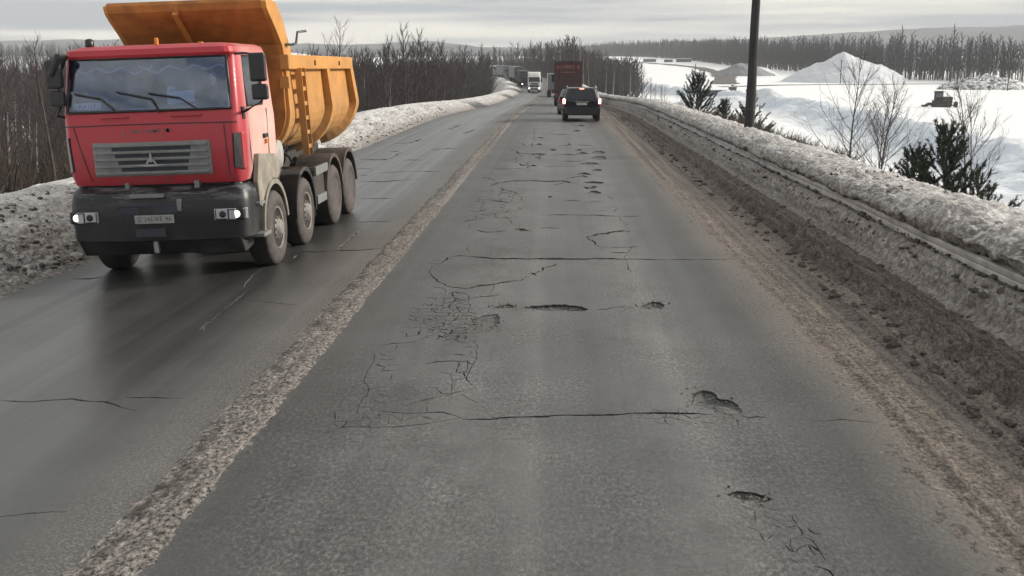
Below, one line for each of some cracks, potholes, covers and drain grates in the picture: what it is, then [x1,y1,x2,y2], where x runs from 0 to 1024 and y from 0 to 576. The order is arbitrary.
crack [324,132,767,434]
pothole [681,386,742,421]
pothole [717,485,784,505]
crack [199,270,296,331]
crack [11,397,183,411]
crack [732,504,834,576]
pothole [516,304,592,313]
pothole [640,300,670,310]
pothole [464,314,504,334]
